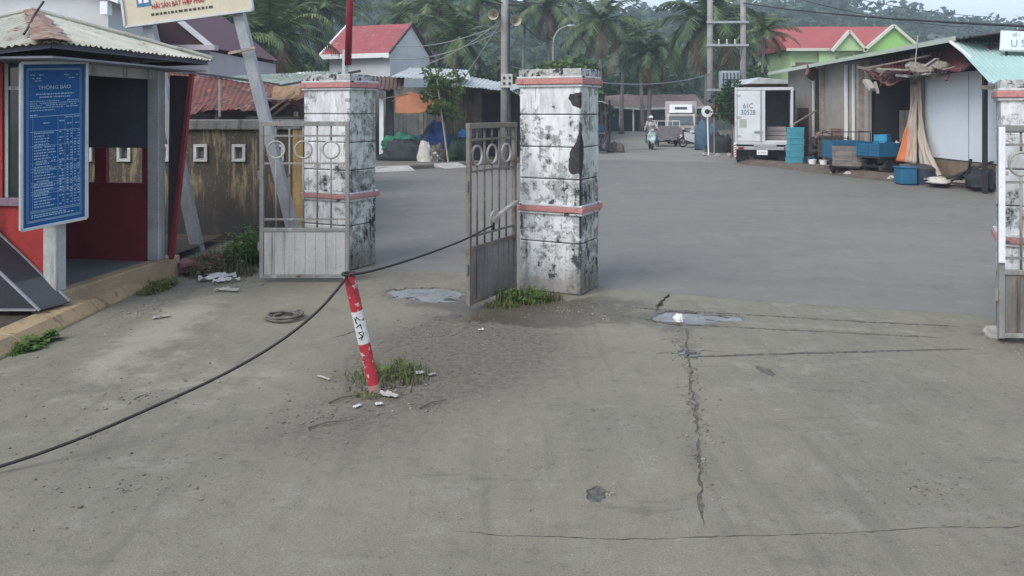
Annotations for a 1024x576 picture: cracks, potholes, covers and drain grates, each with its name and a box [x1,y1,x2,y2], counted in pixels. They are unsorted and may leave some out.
crack [455,294,1024,540]
pothole [586,486,607,503]
